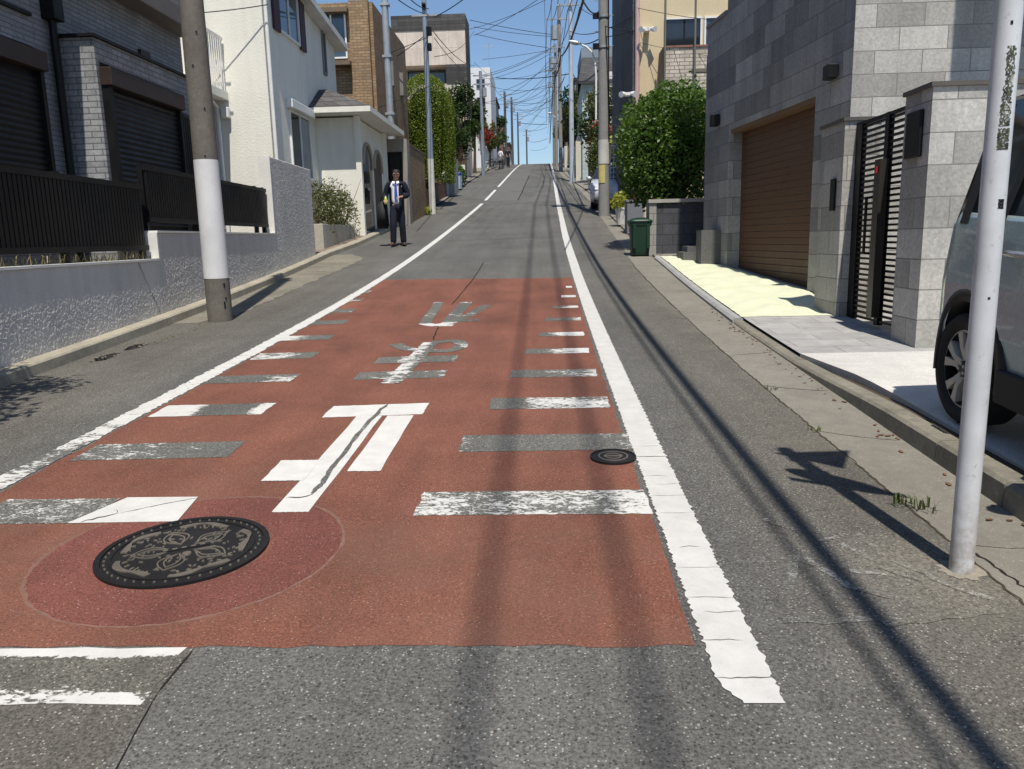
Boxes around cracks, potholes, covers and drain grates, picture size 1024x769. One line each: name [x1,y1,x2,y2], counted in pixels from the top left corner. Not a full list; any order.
manhole cover [590,449,636,465]
crack [293,404,388,498]
crack [340,262,484,339]
manhole cover [92,516,270,590]
